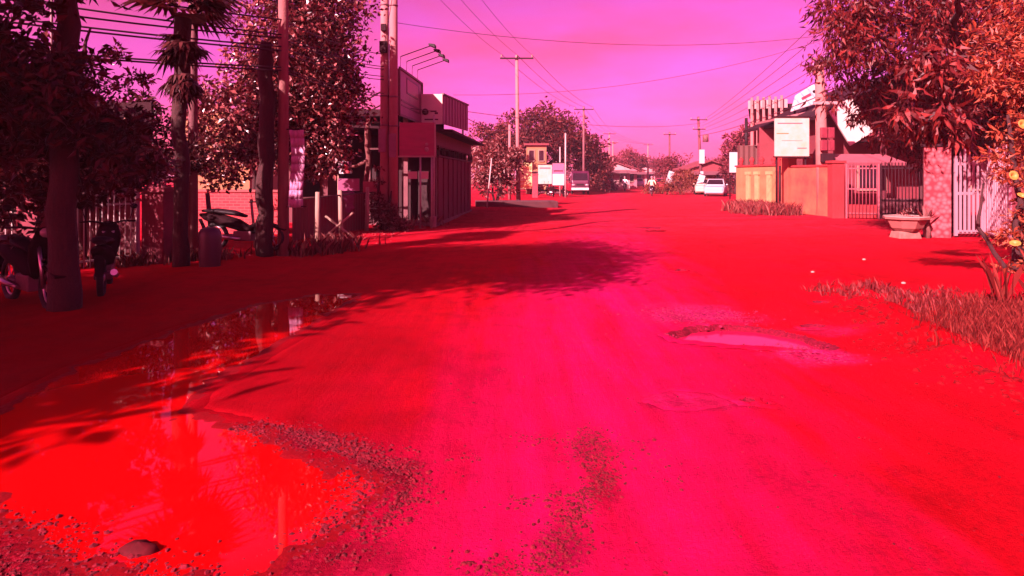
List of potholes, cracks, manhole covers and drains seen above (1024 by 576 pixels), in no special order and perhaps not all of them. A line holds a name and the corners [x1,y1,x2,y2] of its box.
pothole [0,293,412,576]
pothole [658,324,847,355]
pothole [641,390,733,411]
pothole [792,322,835,330]
